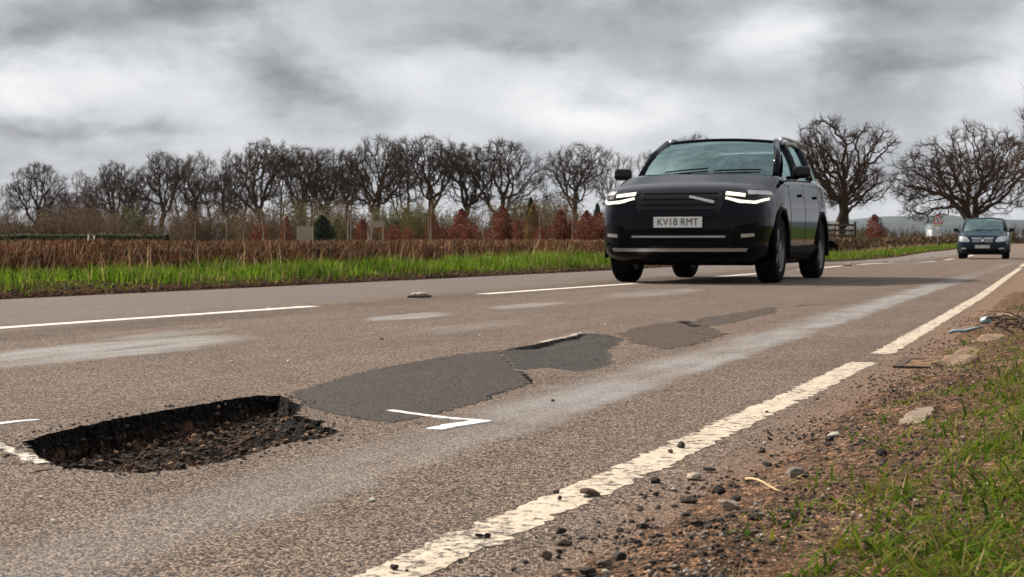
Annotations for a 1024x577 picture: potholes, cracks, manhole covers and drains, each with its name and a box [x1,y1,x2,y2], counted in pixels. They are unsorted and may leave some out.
pothole [22,395,338,473]
